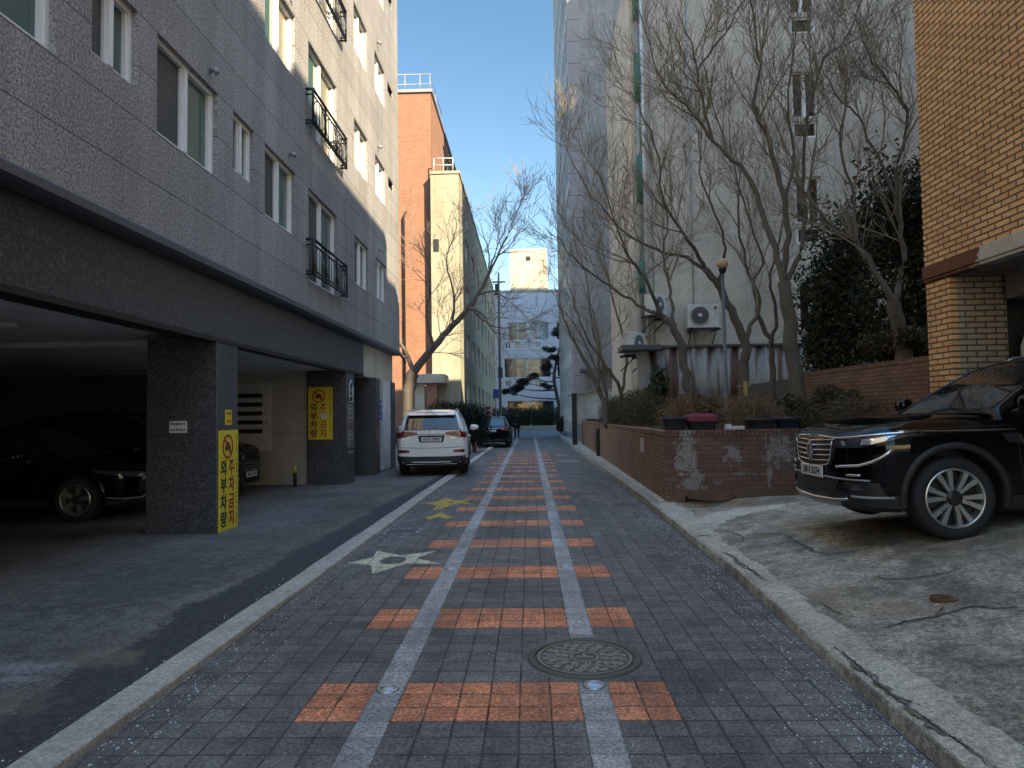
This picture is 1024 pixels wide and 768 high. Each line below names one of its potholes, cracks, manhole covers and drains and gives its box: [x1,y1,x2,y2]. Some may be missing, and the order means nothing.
crack [723,523,877,582]
manhole cover [929,594,959,603]
crack [819,602,844,614]
manhole cover [528,639,642,680]
crack [876,604,1017,630]
crack [876,567,962,580]
